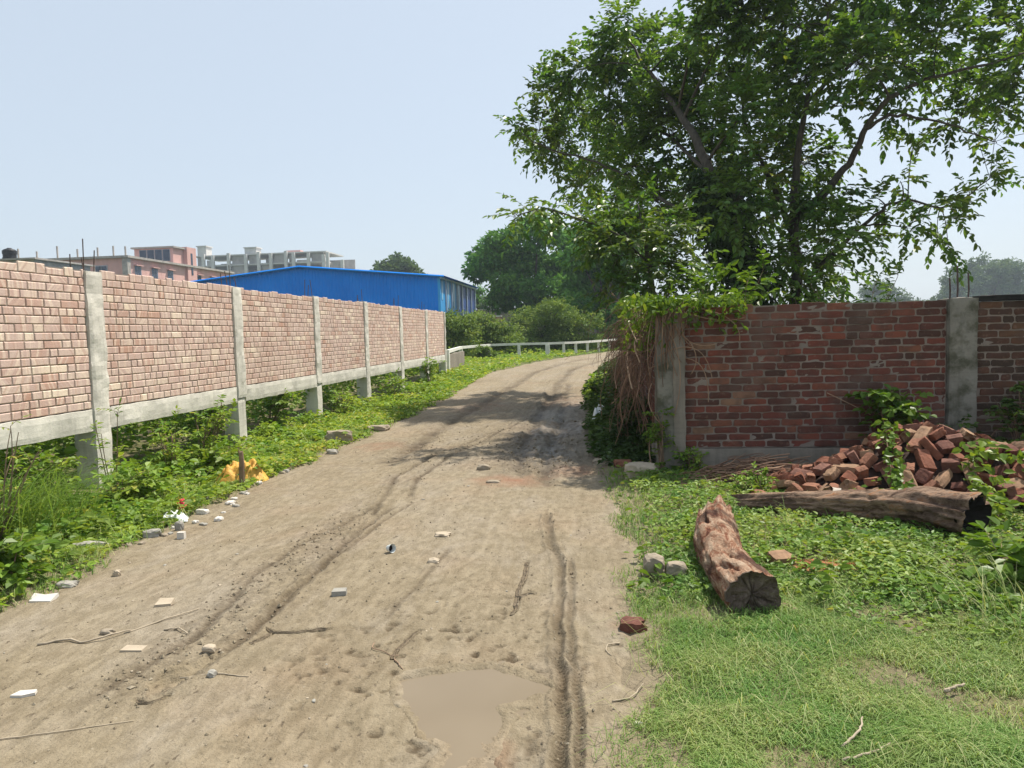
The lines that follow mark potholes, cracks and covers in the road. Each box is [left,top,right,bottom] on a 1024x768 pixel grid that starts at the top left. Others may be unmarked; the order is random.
pothole [389,661,556,768]
